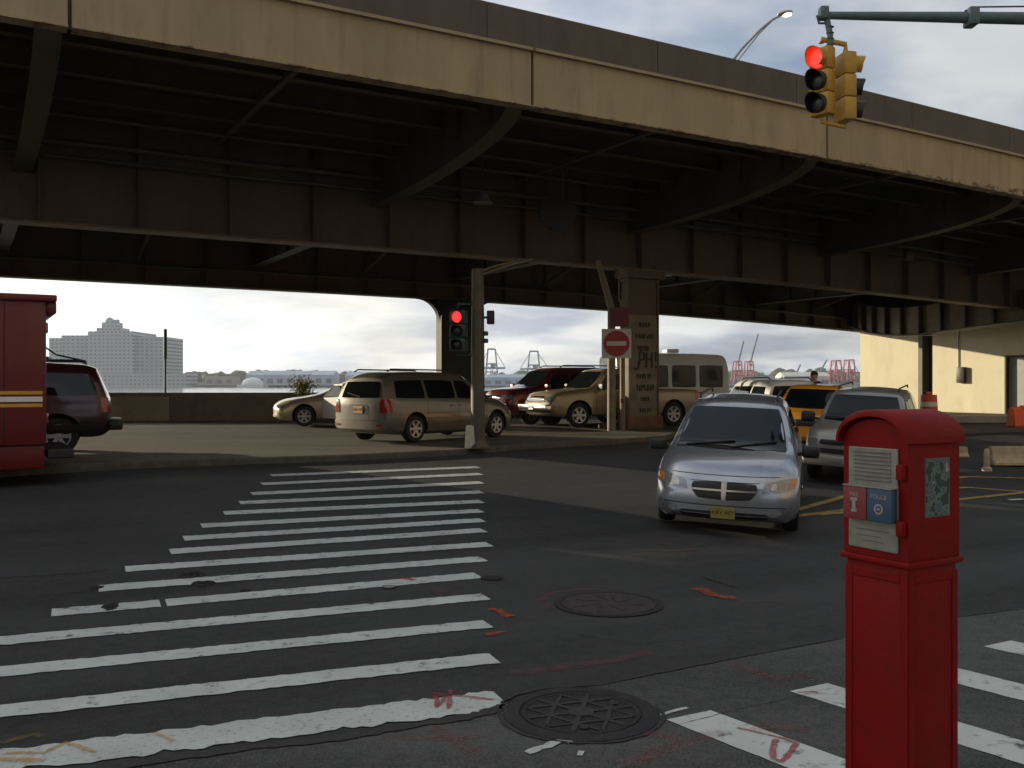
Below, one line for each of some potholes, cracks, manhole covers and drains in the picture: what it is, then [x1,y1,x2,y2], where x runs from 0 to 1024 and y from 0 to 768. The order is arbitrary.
manhole cover [503,687,659,742]
manhole cover [554,591,663,618]
